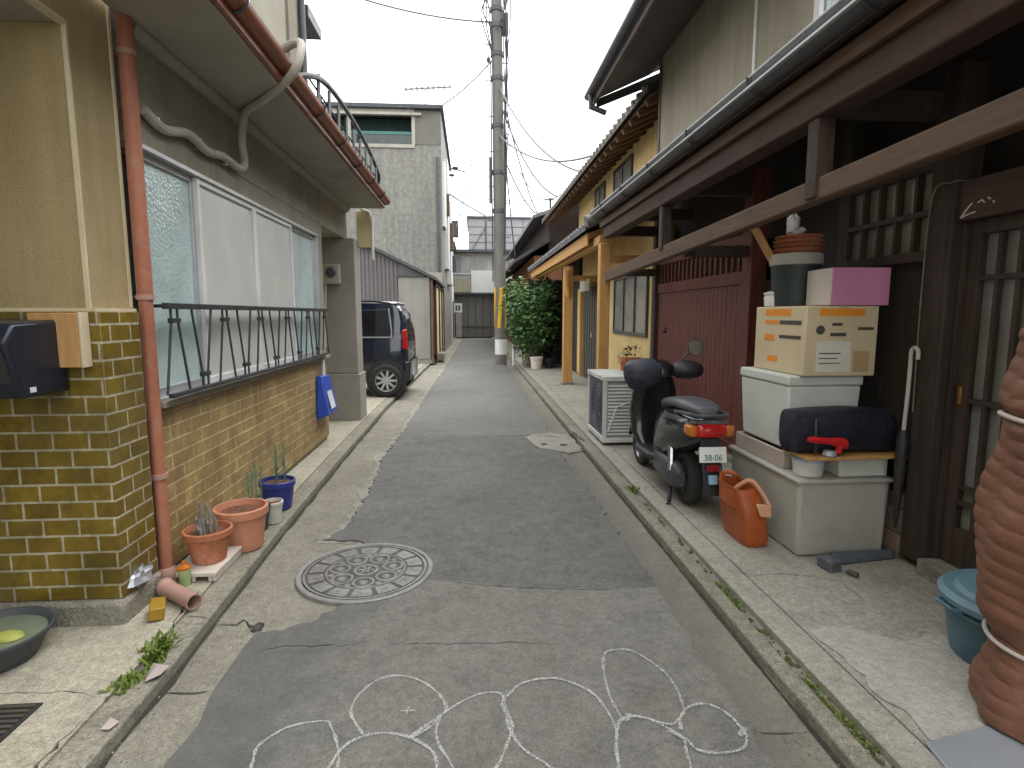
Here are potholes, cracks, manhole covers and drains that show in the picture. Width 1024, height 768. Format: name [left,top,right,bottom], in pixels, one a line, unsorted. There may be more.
manhole cover [295,543,433,606]
